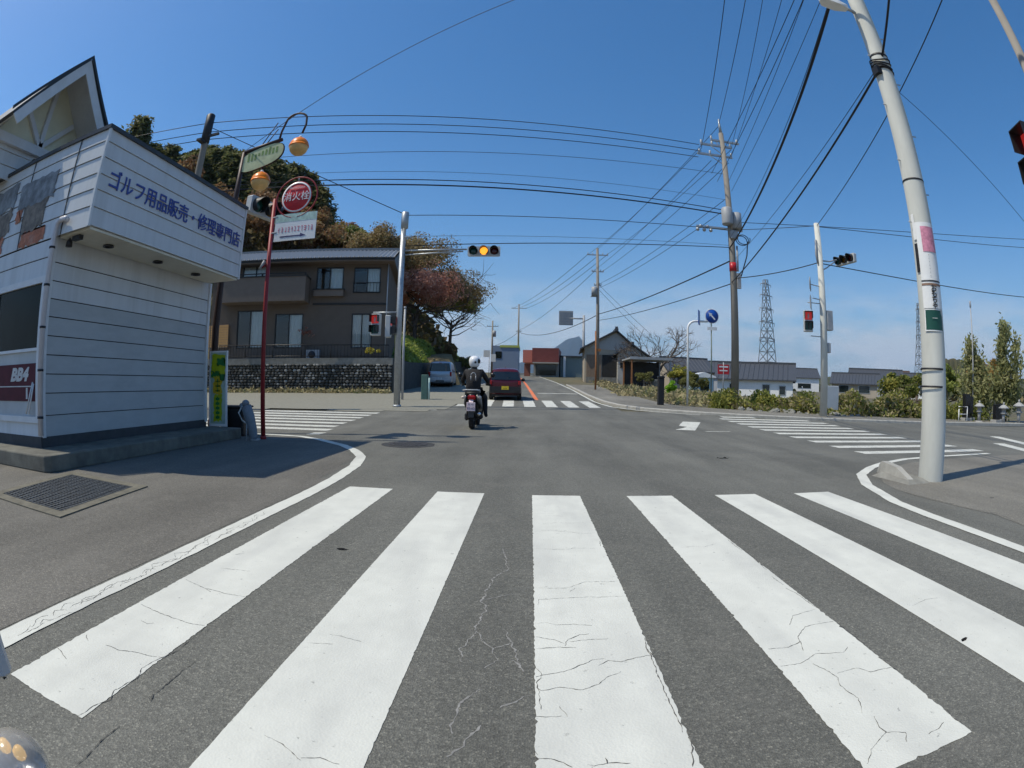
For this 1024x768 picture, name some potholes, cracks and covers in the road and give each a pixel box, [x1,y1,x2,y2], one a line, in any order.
crack [23,512,264,633]
drain grate [0,471,148,518]
crack [57,605,203,764]
crack [446,549,694,767]
crack [690,542,961,764]
